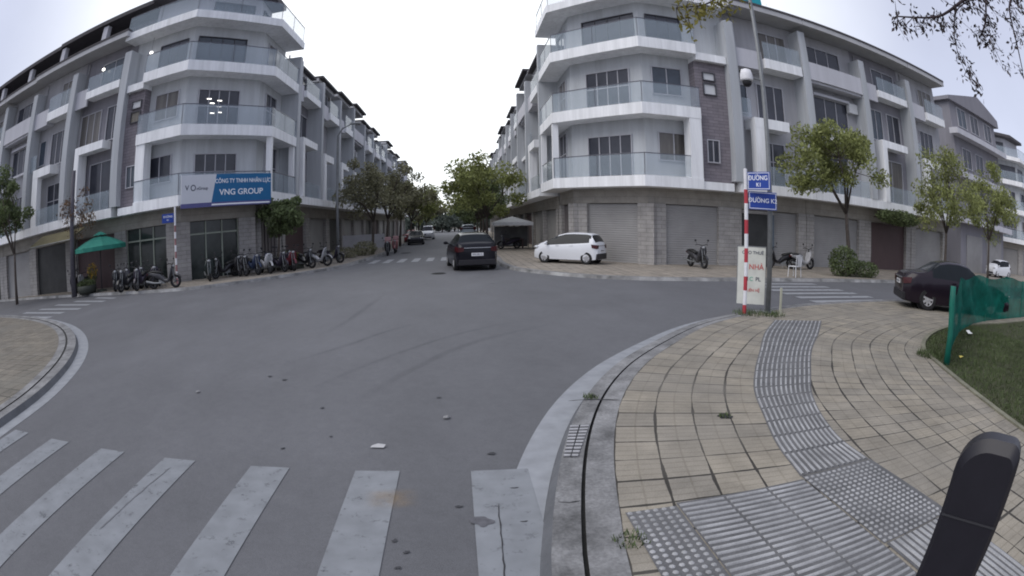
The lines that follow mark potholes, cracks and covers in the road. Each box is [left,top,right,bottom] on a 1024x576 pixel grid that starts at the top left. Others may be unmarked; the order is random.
crack [101,467,171,528]
pothole [470,516,495,527]
crack [498,505,527,576]
drain grate [564,424,590,457]
